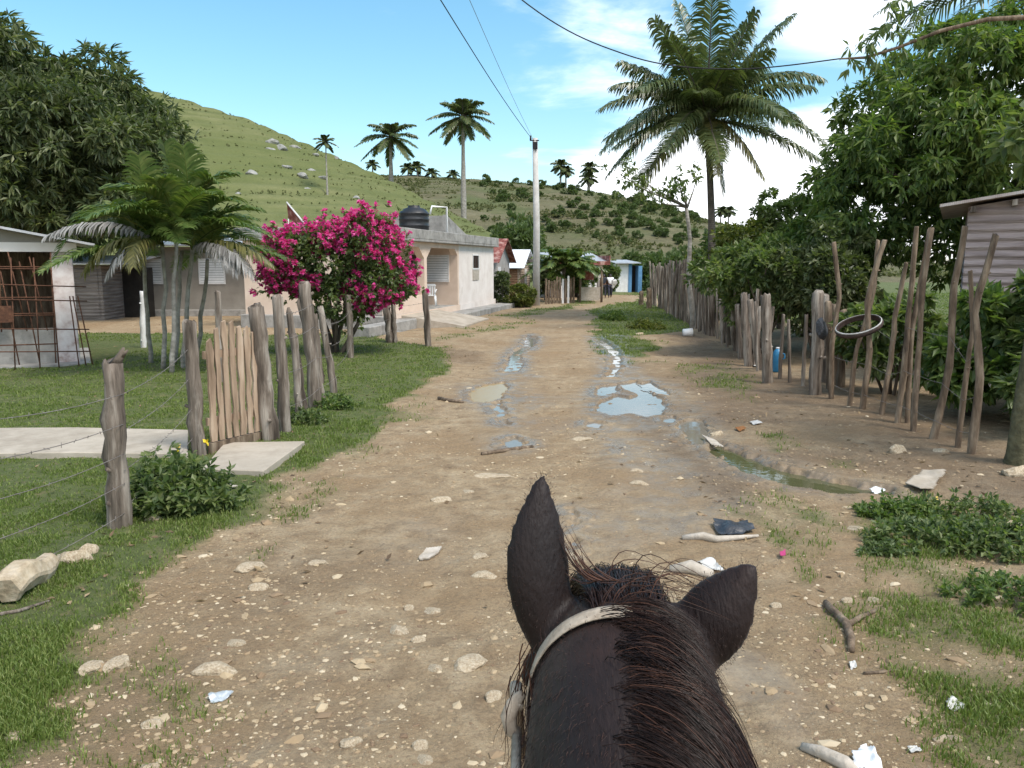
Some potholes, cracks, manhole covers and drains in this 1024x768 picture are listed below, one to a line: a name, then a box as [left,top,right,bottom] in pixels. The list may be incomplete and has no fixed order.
pothole [460,380,516,405]
pothole [587,379,675,419]
